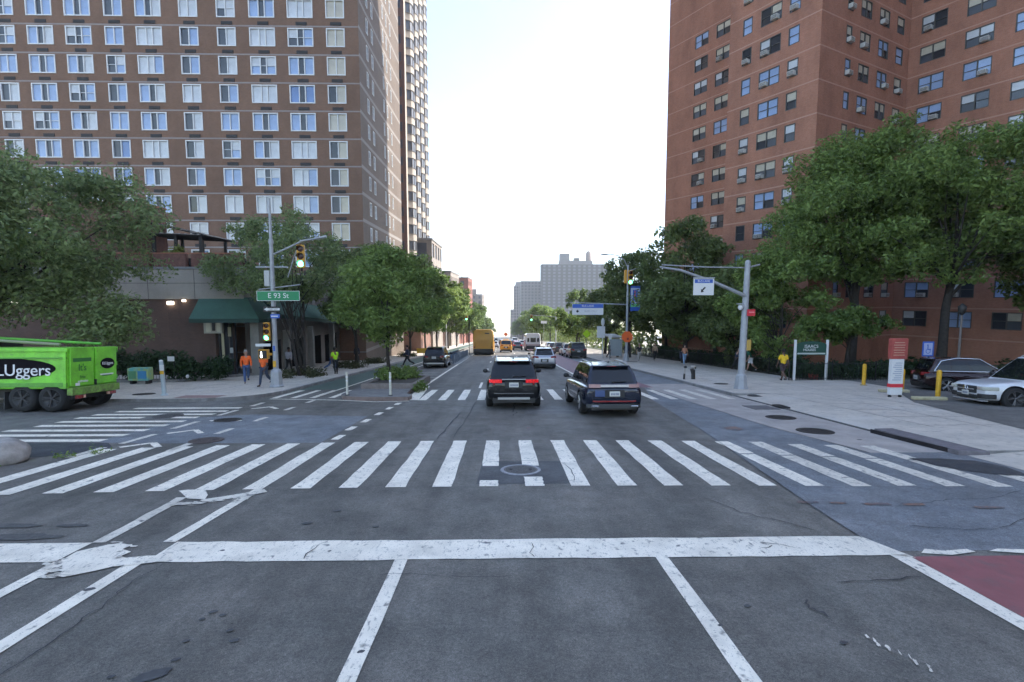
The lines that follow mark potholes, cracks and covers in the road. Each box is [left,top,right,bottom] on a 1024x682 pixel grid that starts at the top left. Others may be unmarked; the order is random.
crack [910,518,1024,530]
manhole cover [500,464,541,476]
